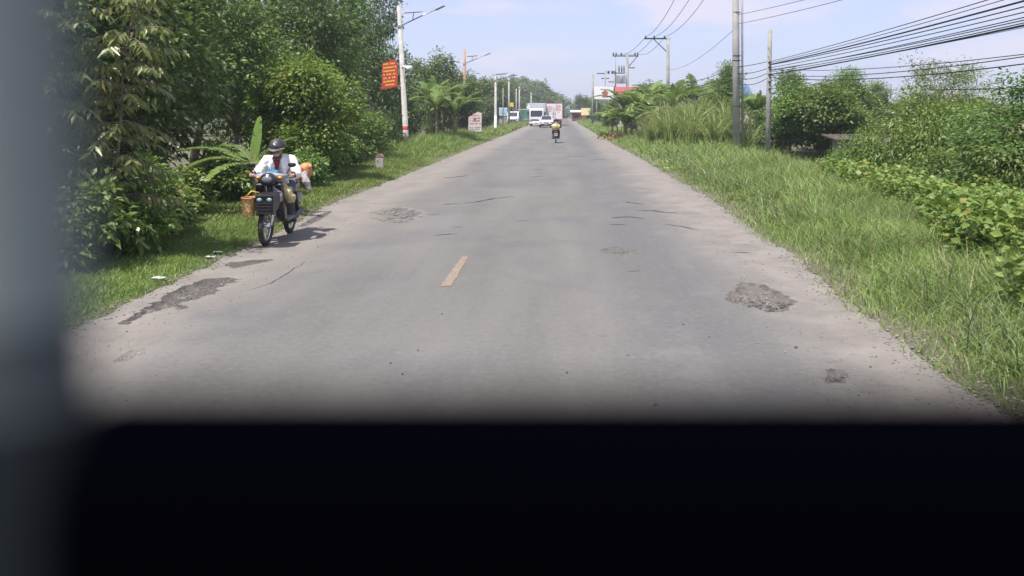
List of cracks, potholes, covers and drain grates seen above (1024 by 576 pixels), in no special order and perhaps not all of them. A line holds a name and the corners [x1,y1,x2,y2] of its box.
pothole [821,369,850,383]
pothole [725,282,798,312]
crack [609,202,698,230]
pothole [599,247,638,256]
